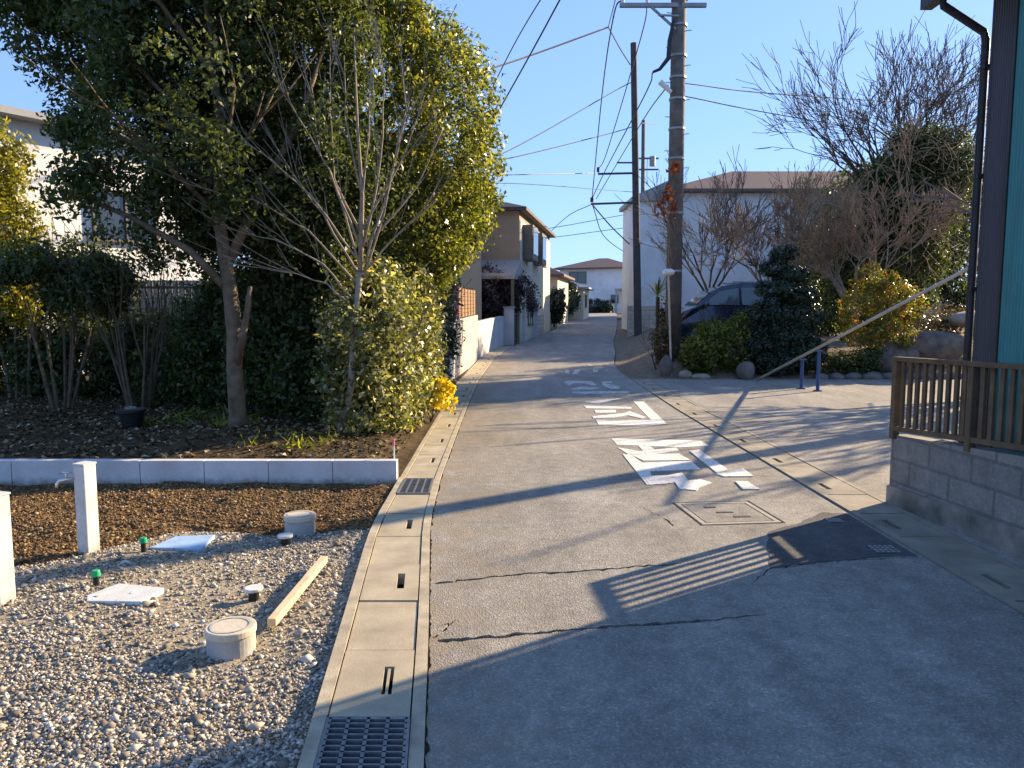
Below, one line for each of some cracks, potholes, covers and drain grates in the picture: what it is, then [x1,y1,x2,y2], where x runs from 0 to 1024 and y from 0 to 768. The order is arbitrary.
manhole cover [675,501,782,526]
drain grate [396,478,434,496]
drain grate [313,716,410,768]
